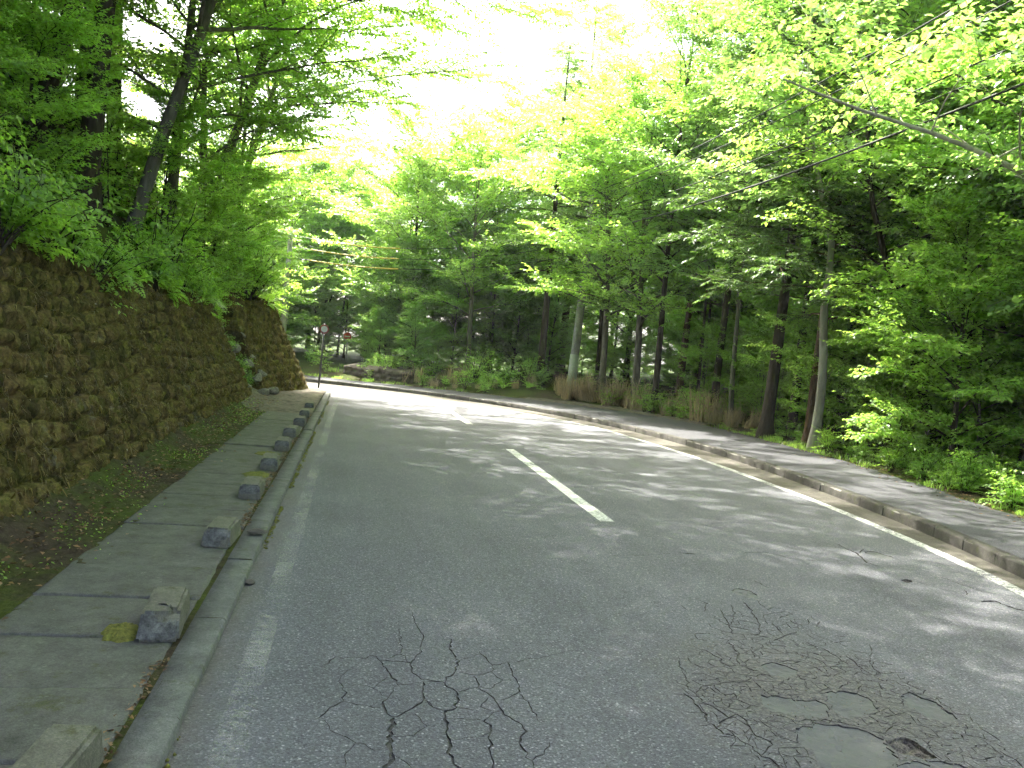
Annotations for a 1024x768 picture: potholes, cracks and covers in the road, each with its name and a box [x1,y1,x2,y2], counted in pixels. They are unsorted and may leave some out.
pothole [795,722,899,768]
crack [677,580,1022,768]
pothole [885,737,936,762]
crack [319,612,567,768]
pothole [825,691,878,719]
pothole [901,692,958,723]
